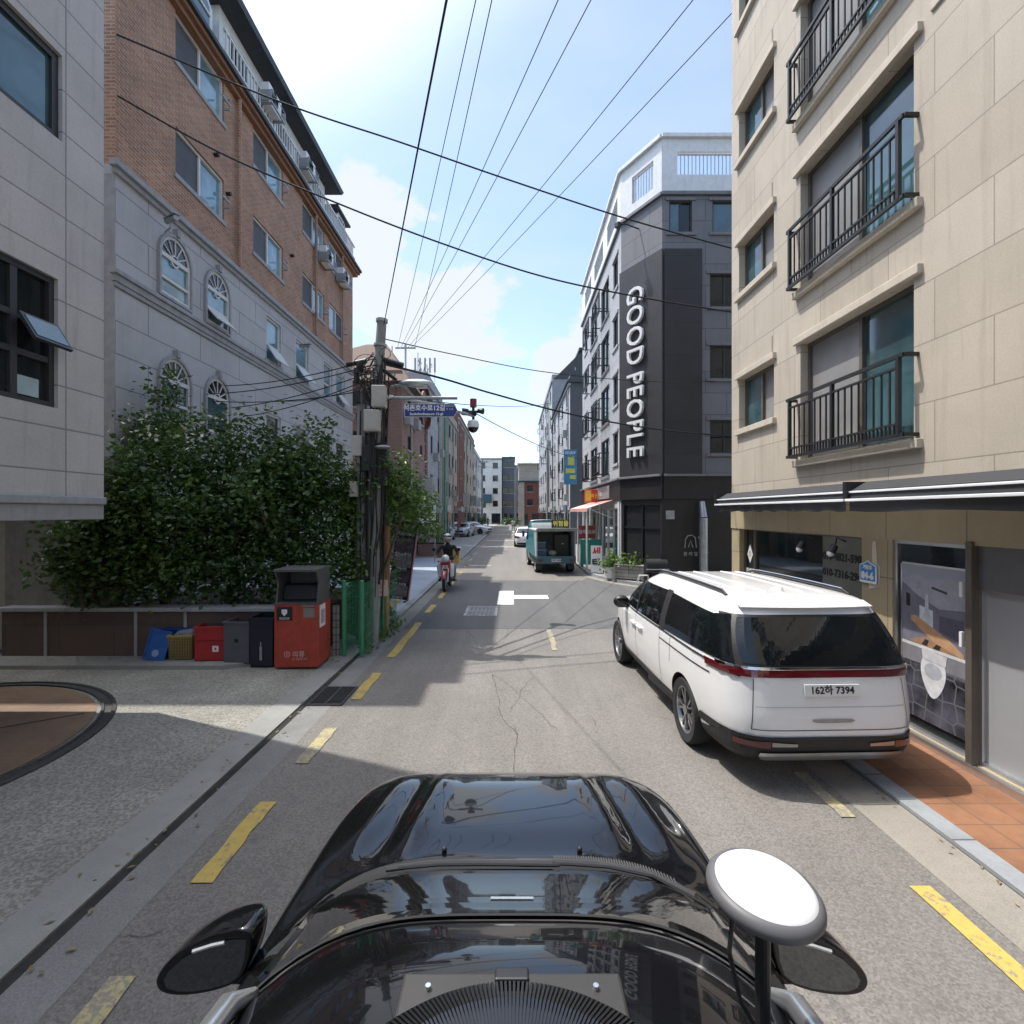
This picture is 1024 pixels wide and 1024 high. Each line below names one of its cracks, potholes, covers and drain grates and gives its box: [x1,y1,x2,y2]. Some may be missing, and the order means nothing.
crack [492,674,558,772]
drain grate [306,686,358,706]
